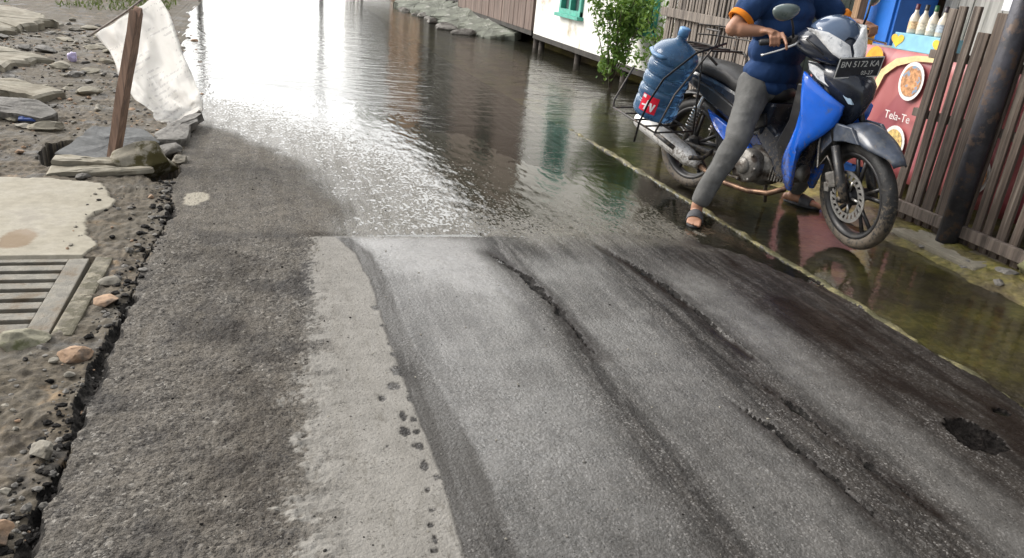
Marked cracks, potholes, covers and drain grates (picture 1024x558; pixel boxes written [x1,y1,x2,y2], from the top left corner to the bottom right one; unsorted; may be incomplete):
drain grate [0,257,113,336]
pothole [942,418,1012,456]
crack [746,384,932,523]
crack [493,257,596,354]
